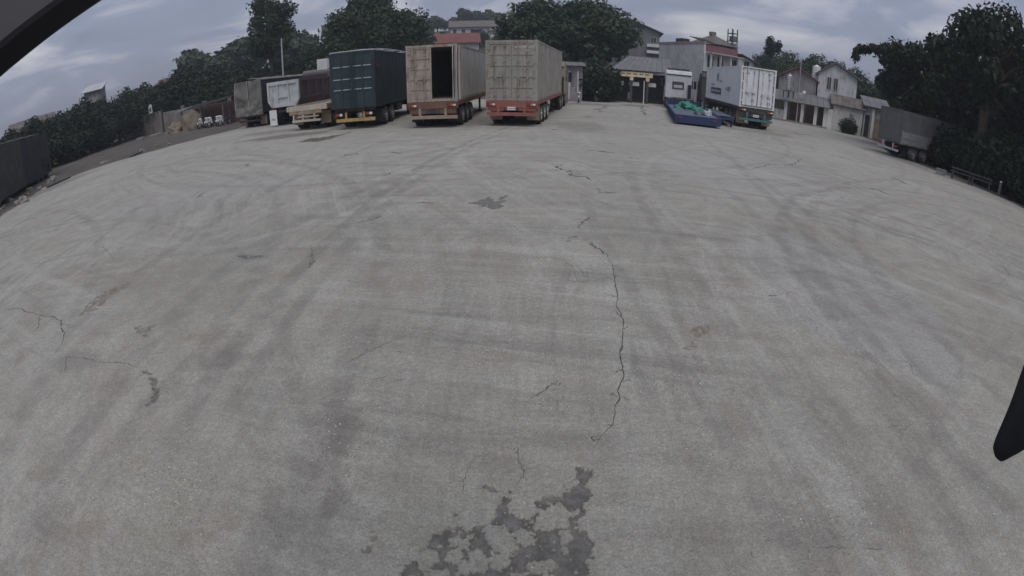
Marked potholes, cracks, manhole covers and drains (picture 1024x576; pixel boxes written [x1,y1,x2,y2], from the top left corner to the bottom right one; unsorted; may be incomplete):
crack [2,308,140,376]
pothole [398,461,598,576]
pothole [464,194,513,210]
